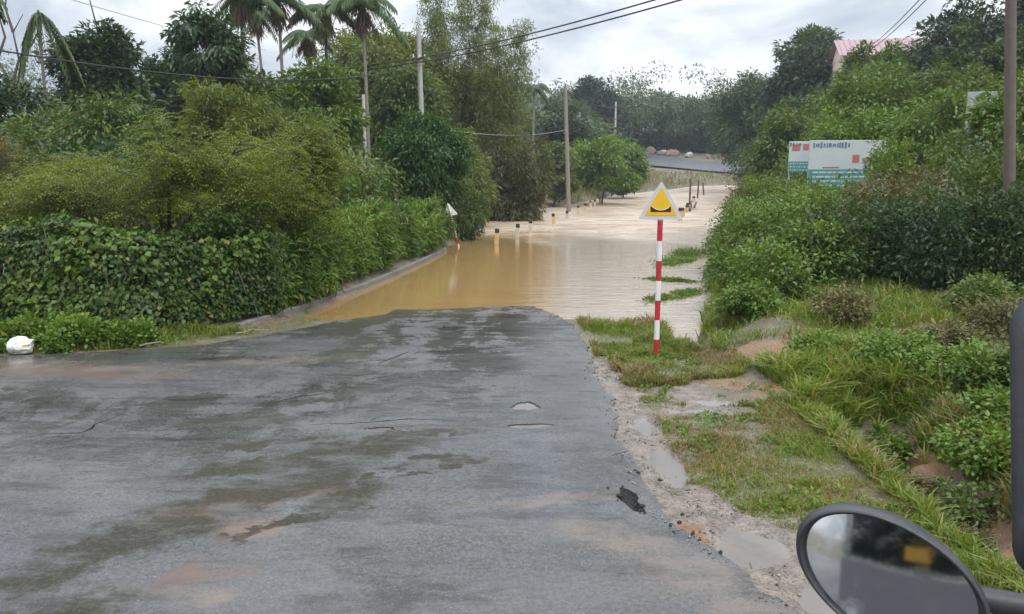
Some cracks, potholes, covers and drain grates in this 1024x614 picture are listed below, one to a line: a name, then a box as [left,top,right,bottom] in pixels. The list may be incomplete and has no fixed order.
crack [25,417,114,437]
pothole [510,401,541,410]
